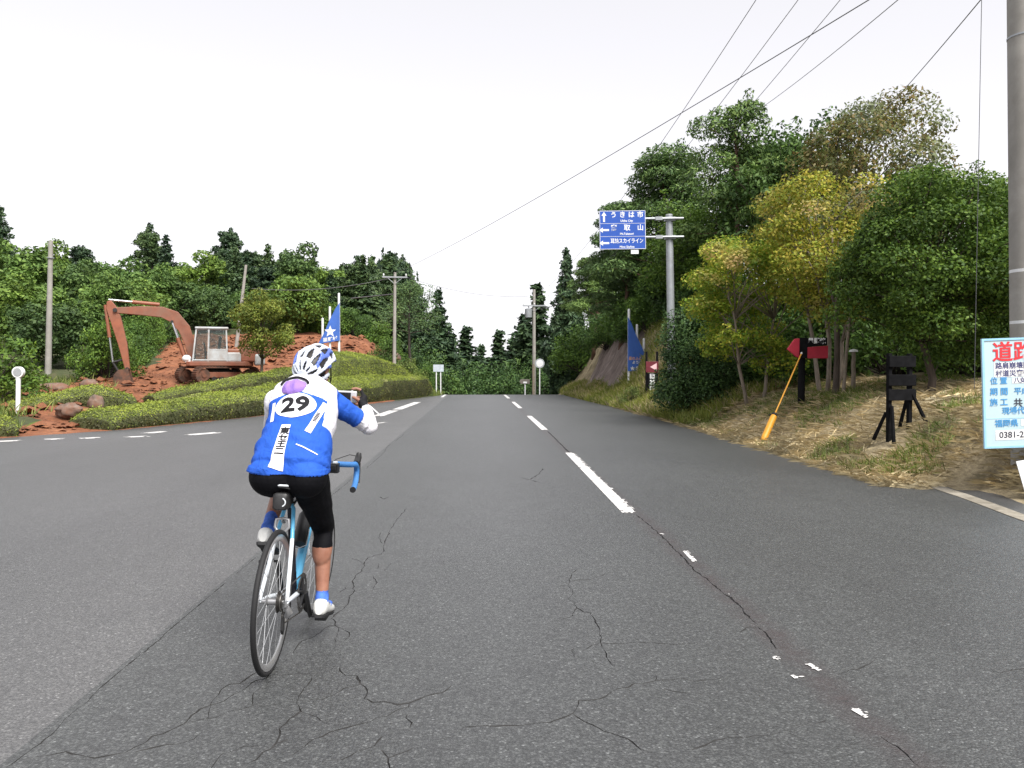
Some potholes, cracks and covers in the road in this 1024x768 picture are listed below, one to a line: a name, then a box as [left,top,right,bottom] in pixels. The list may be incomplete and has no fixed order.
crack [468,674,772,752]
crack [293,508,407,654]
crack [561,570,676,668]
